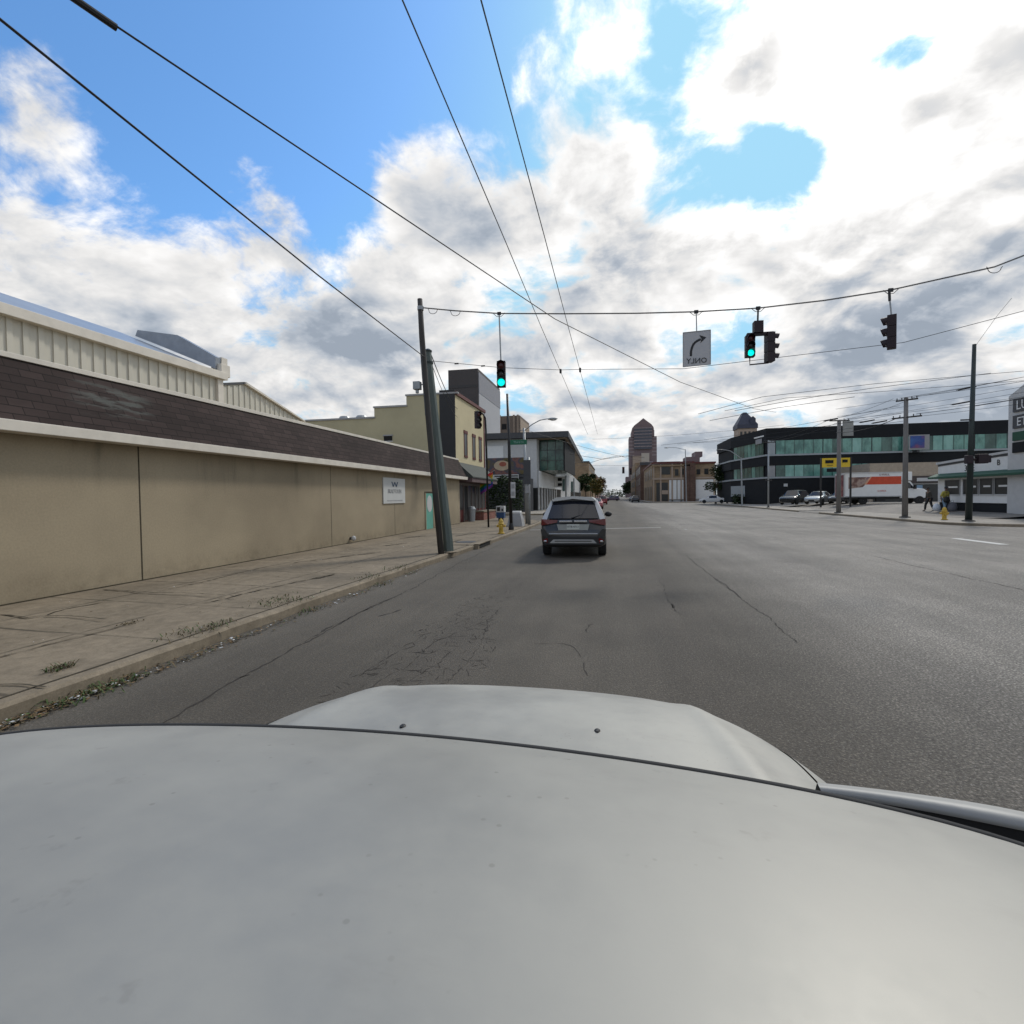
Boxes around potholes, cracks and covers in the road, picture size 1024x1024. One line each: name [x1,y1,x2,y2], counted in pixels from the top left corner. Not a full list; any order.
crack [536,624,592,676]
crack [319,587,516,702]
